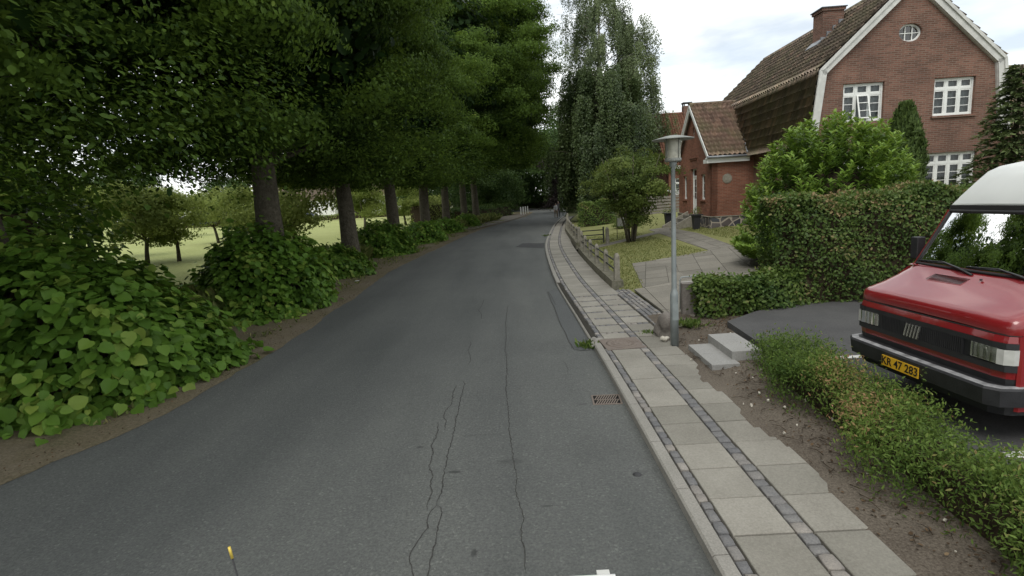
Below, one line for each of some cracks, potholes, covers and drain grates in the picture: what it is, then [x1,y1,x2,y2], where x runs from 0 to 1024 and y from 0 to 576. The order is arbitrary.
manhole cover [599,337,647,351]
drain grate [591,394,623,405]
crack [409,312,526,576]
